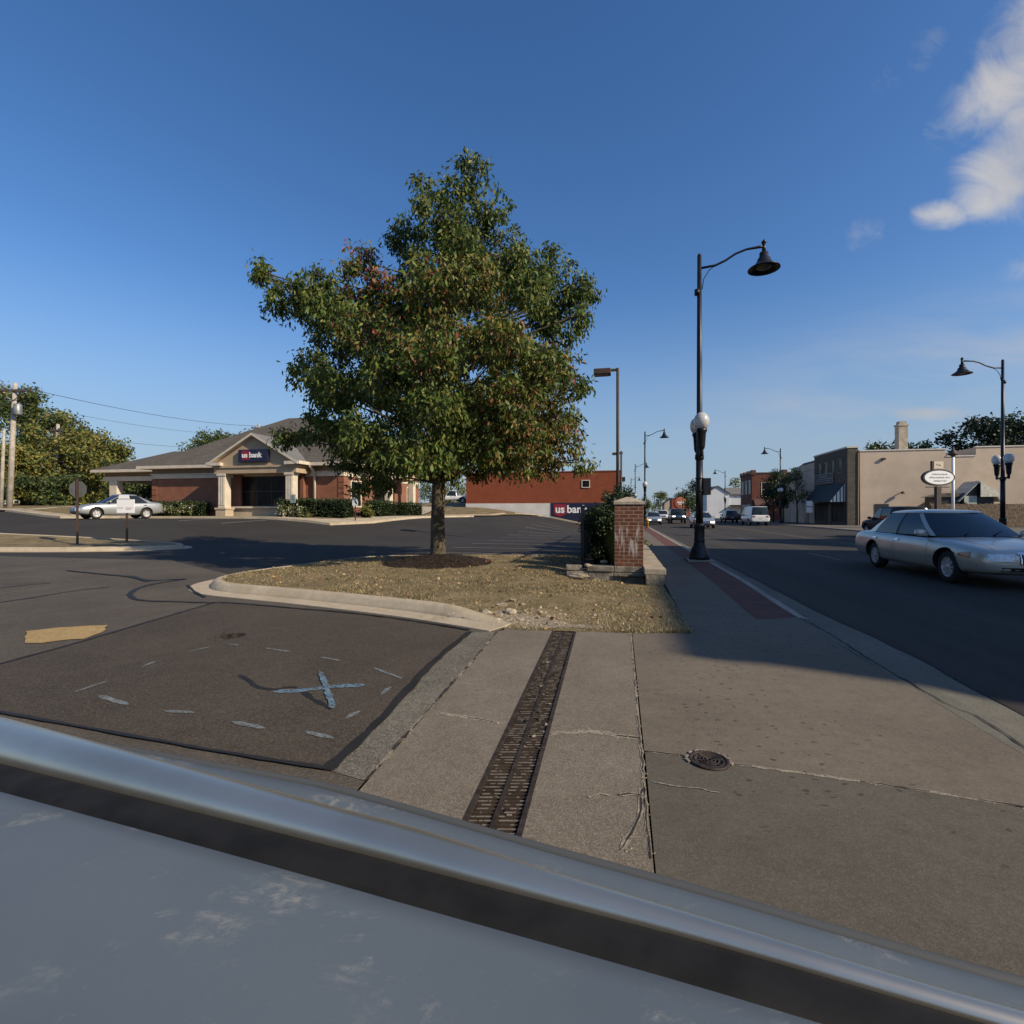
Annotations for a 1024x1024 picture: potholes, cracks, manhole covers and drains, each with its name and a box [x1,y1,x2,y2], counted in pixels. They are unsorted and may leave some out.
manhole cover [684,749,734,771]
crack [543,728,641,739]
crack [588,781,720,852]
drain grate [462,631,576,837]
